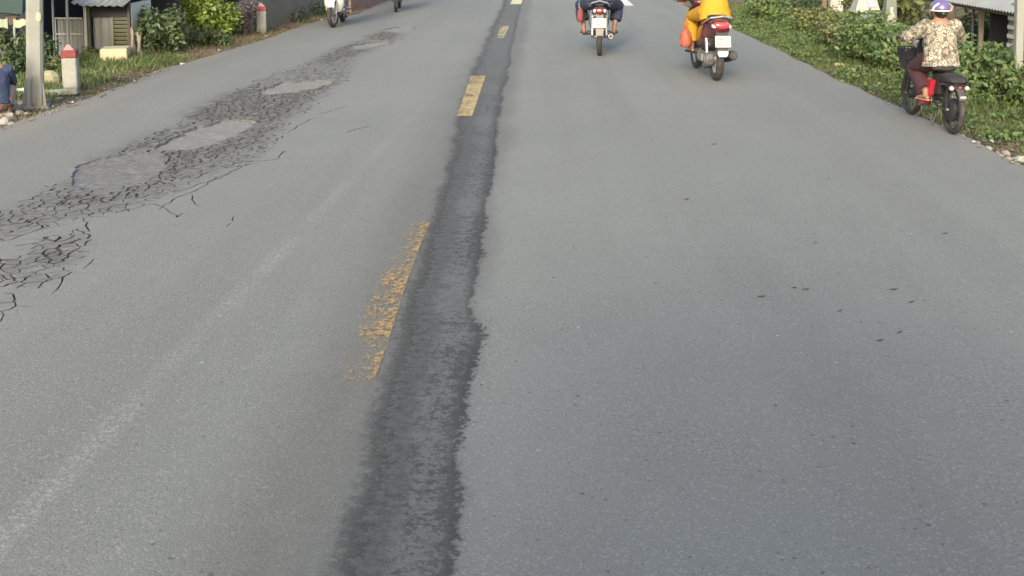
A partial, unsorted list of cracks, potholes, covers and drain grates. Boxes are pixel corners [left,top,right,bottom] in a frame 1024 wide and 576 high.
crack [0,31,409,321]
